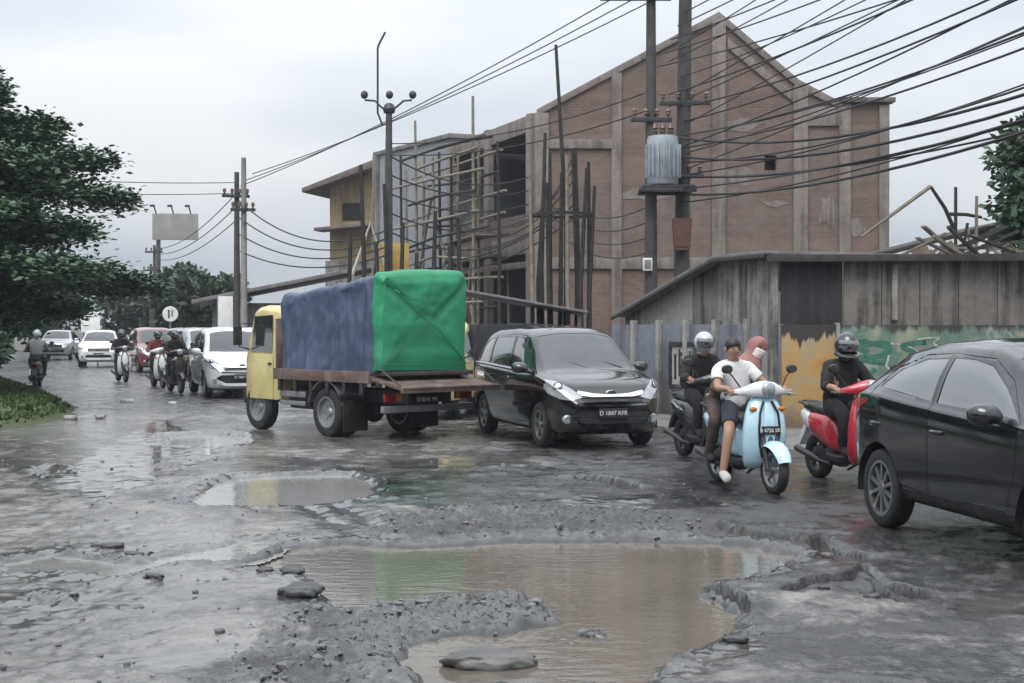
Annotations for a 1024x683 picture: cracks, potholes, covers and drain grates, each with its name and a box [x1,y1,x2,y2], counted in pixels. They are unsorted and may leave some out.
pothole [20,462,71,476]
pothole [172,468,393,508]
pothole [234,530,820,683]
